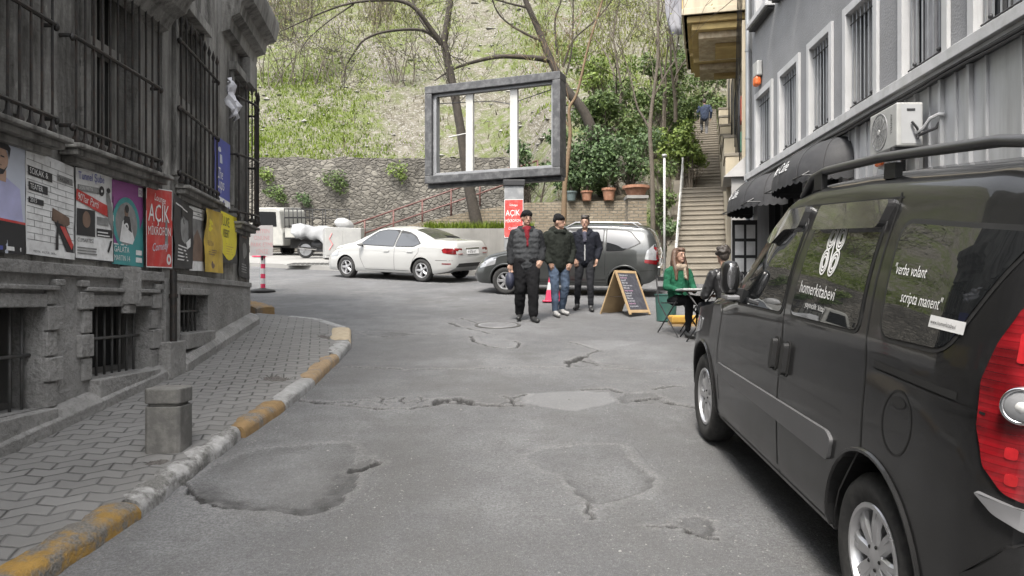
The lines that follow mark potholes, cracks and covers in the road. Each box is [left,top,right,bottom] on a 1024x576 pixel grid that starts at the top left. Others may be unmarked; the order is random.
crack [295,392,538,412]
crack [333,313,693,391]
pothole [511,440,669,526]
pothole [627,511,734,547]
pothole [170,439,395,523]
